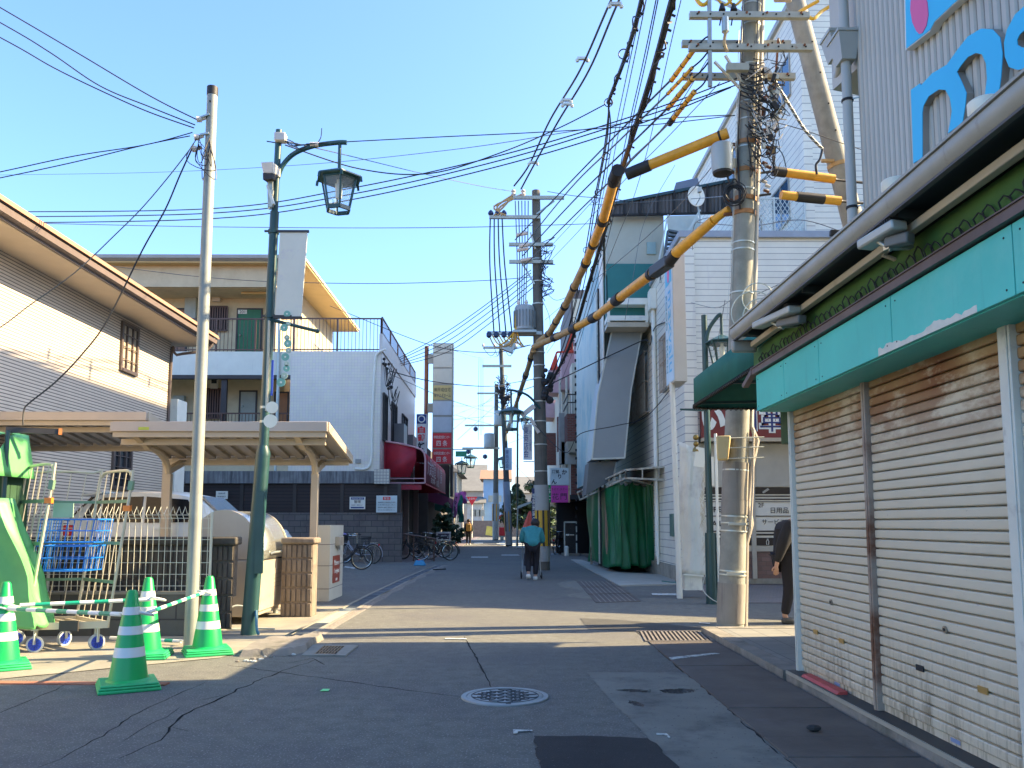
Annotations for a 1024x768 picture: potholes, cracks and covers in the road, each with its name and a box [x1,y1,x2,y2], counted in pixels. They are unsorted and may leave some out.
drain grate [636,631,715,642]
crack [40,661,311,767]
drain grate [302,644,358,657]
manhole cover [461,687,549,707]
